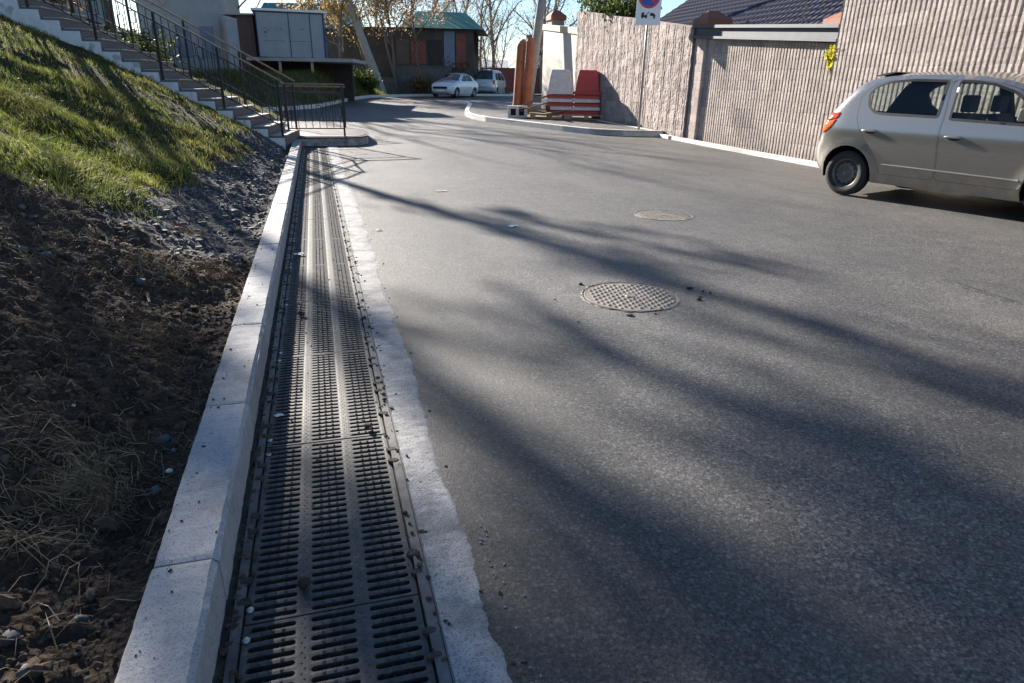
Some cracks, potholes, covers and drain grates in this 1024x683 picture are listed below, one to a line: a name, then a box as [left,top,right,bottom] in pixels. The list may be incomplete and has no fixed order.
drain grate [245,435,418,626]
drain grate [297,192,338,205]
drain grate [300,174,333,183]
crack [940,278,1024,305]
drain grate [299,182,335,193]
drain grate [267,350,385,448]
drain grate [285,263,357,303]
drain grate [278,298,368,357]
drain grate [290,238,350,266]
drain grate [295,204,341,220]
manhole cover [581,282,681,313]
manhole cover [634,210,695,221]
